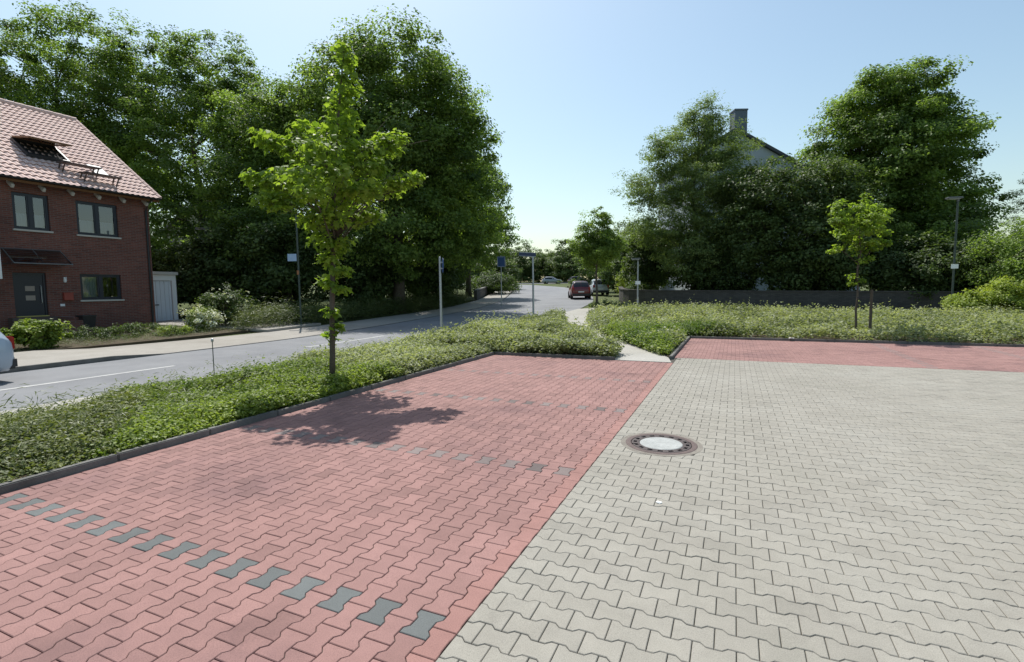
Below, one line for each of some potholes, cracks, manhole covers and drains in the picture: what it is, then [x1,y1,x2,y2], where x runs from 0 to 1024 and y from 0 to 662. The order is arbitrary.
manhole cover [621,432,703,457]
